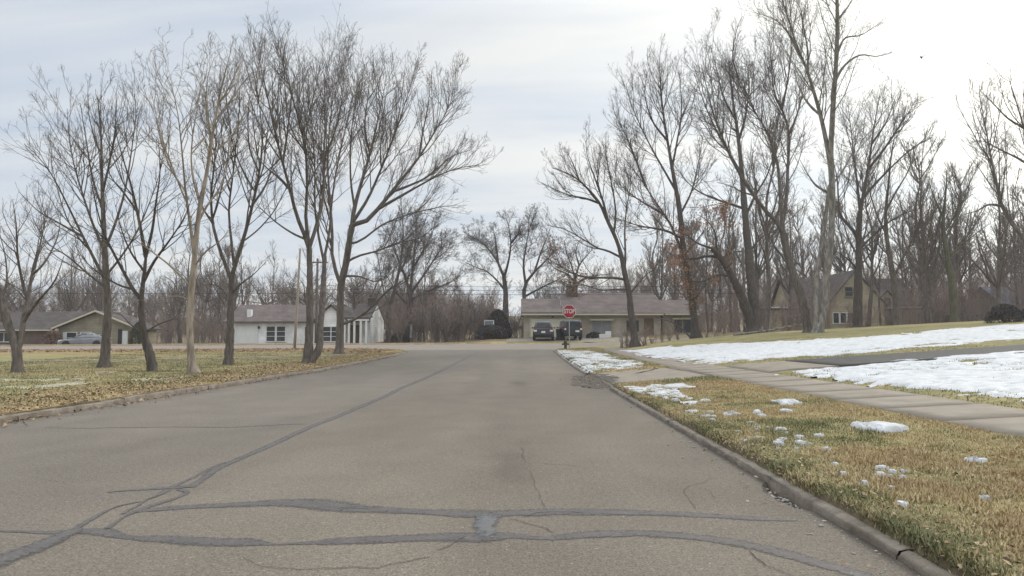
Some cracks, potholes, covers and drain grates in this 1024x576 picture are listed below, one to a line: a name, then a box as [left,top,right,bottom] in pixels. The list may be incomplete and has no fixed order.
crack [478,448,582,533]
crack [243,536,465,570]
